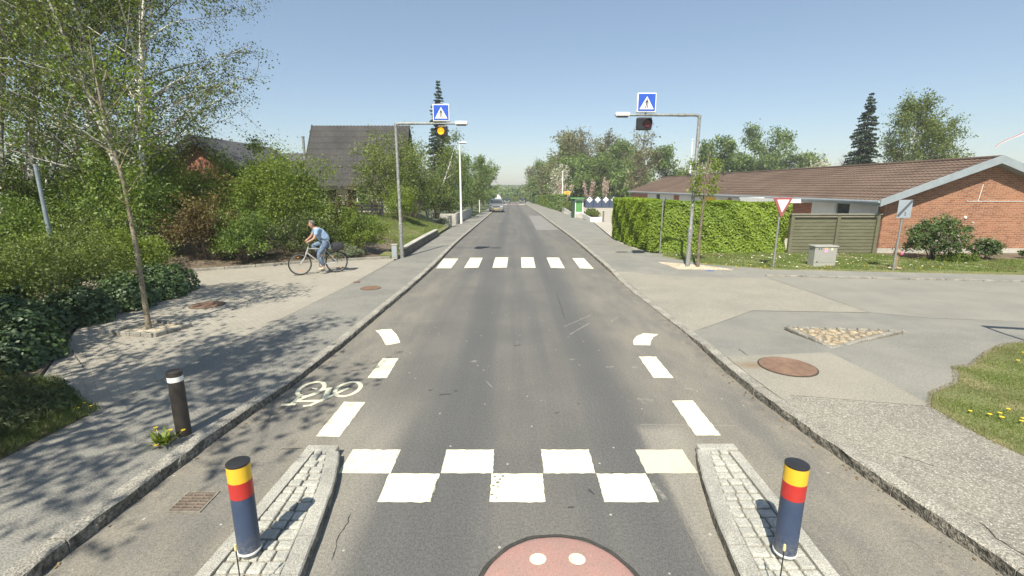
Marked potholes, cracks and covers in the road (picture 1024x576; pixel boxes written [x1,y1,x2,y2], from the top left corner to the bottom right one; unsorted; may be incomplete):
drain grate [165,491,220,513]
manhole cover [188,301,225,309]
manhole cover [757,357,819,377]
